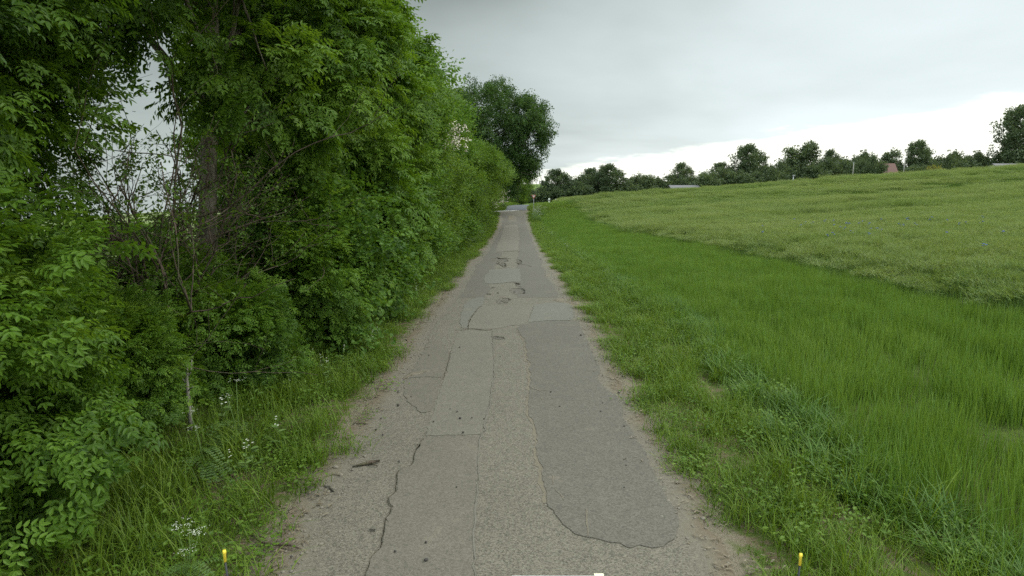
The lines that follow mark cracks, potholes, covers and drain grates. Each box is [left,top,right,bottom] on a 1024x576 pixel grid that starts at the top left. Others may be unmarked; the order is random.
crack [363,438,423,576]
